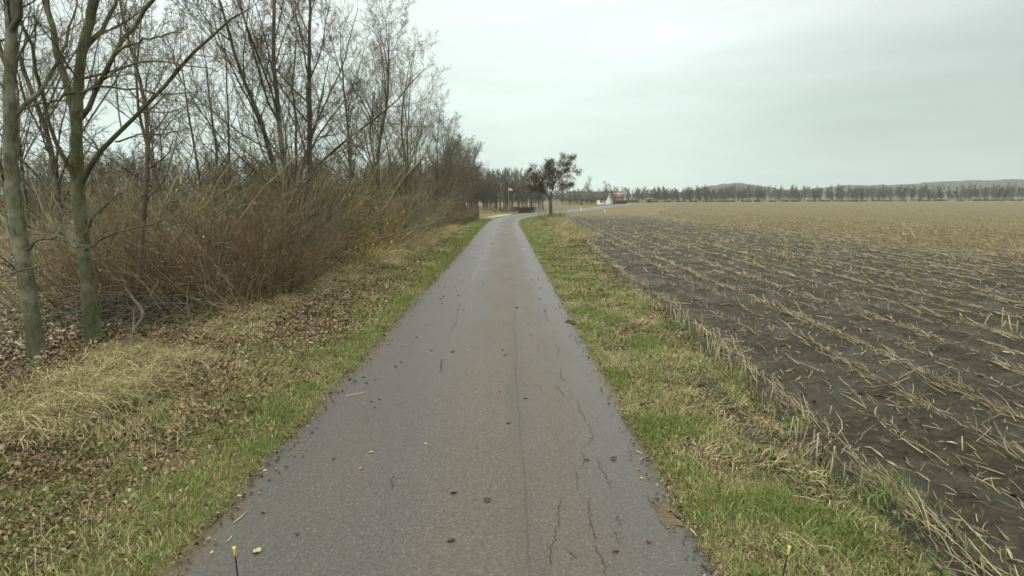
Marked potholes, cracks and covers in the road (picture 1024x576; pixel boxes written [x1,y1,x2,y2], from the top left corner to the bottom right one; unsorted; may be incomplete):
crack [522,345,627,573]
